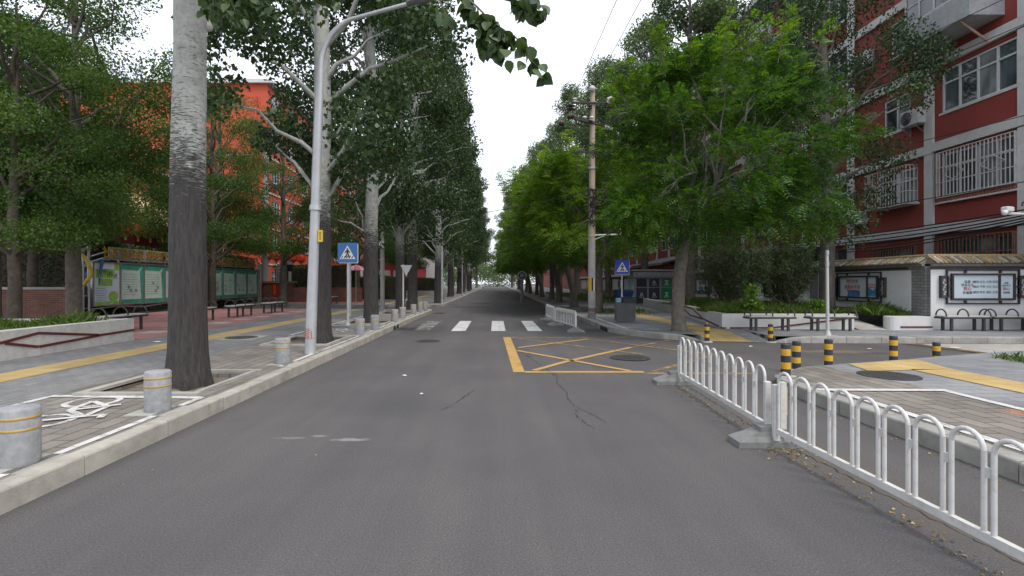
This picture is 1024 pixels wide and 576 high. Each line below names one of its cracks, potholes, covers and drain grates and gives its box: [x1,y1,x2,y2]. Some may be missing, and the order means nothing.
manhole cover [856,370,923,381]
crack [527,355,607,430]
